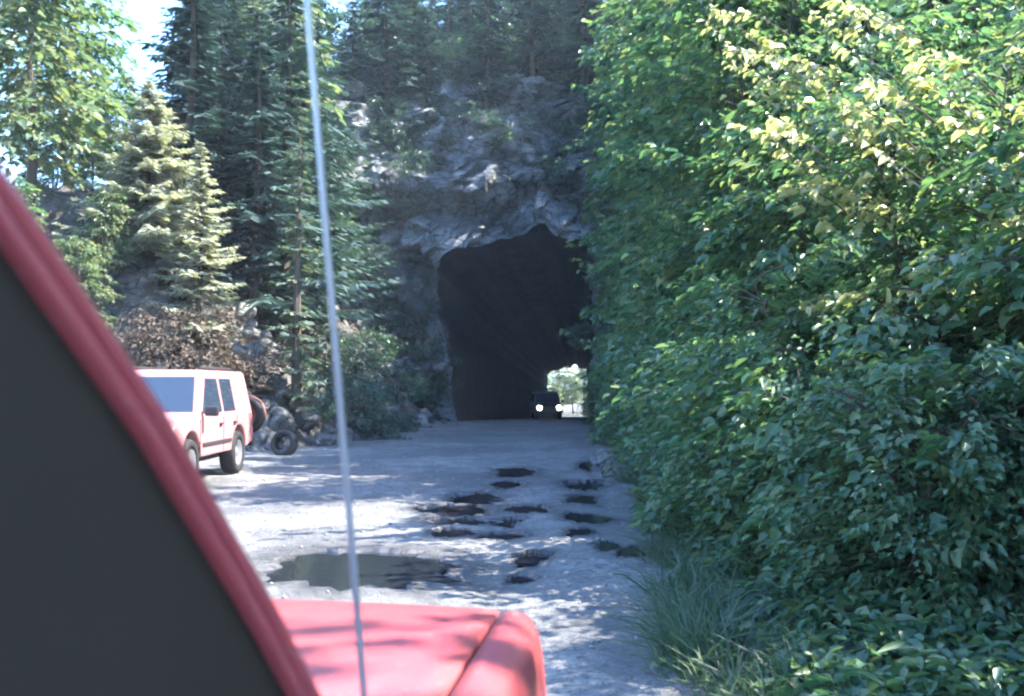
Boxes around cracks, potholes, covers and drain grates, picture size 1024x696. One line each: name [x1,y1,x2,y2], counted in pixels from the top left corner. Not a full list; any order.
pothole [510,549,555,569]
pothole [500,504,554,514]
pothole [591,540,622,552]
pothole [427,527,481,539]
pothole [563,494,599,506]
pothole [615,545,646,558]
pothole [494,466,540,478]
pothole [489,480,527,490]
pothole [254,547,471,593]
pothole [560,479,611,492]
pothole [504,572,540,585]
pothole [443,492,508,506]
